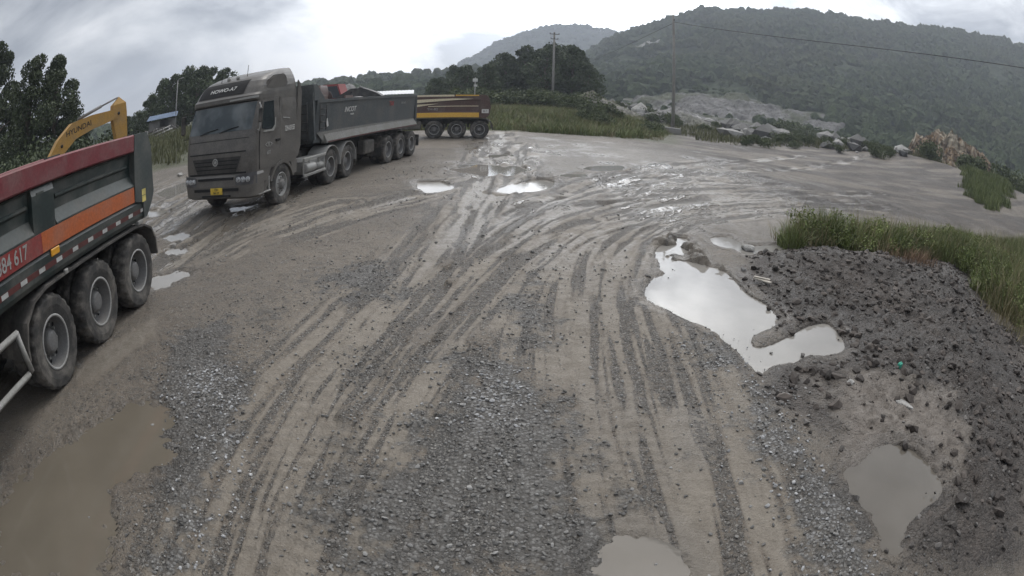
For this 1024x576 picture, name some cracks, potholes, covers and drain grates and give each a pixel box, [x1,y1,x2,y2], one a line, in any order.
pothole [482,175,566,196]
pothole [405,178,463,196]
